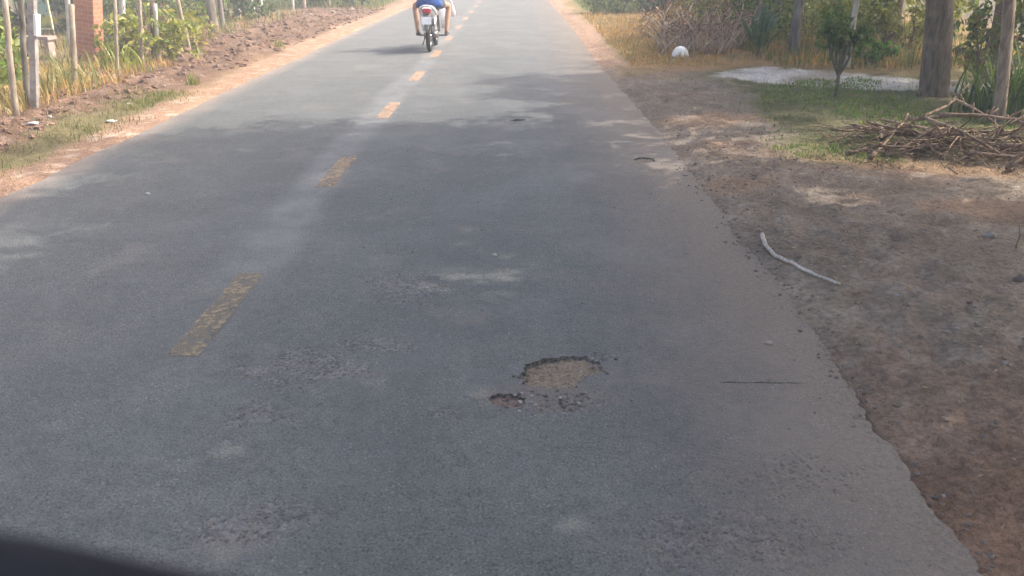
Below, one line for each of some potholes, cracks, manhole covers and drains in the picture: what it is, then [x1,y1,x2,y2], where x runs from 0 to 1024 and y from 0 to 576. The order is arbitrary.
pothole [489,393,526,409]
pothole [520,356,606,390]
